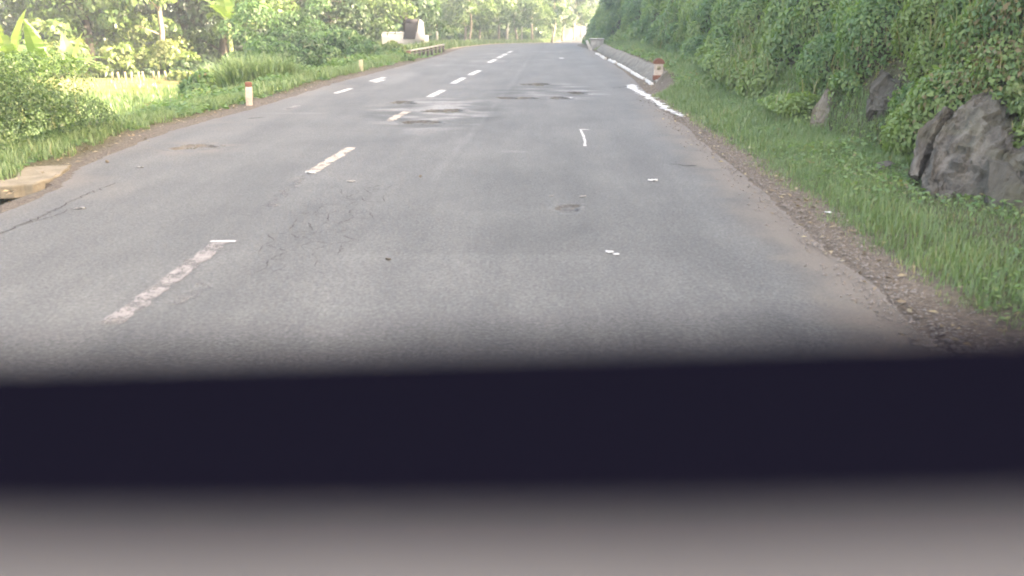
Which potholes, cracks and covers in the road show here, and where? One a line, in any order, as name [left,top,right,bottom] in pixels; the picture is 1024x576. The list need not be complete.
crack [1,182,117,233]
pothole [546,203,589,216]
pothole [161,143,226,151]
crack [255,185,392,273]
